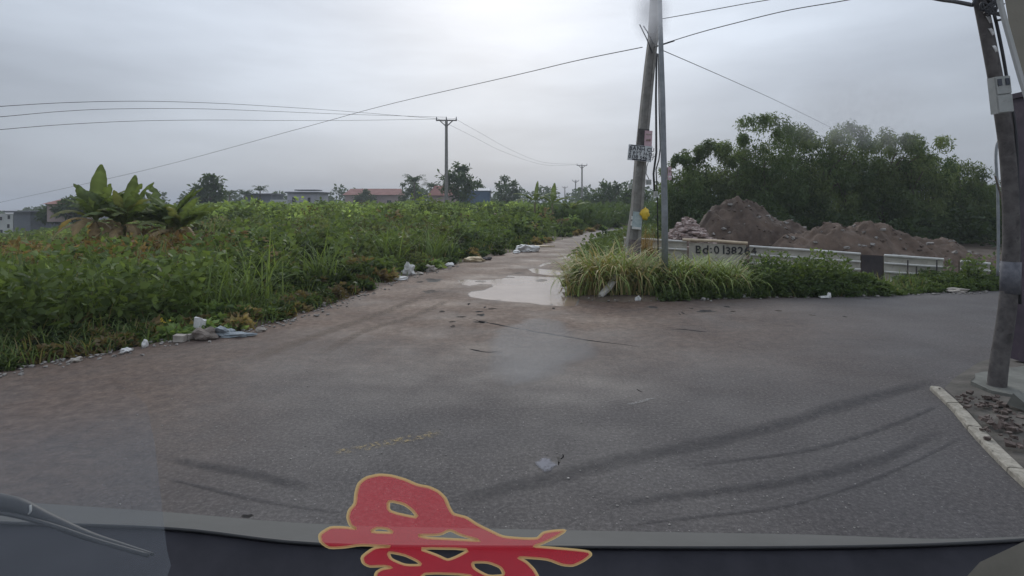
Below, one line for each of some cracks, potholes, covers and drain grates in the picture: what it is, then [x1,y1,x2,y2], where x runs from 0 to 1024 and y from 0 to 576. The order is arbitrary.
crack [468,318,637,347]
